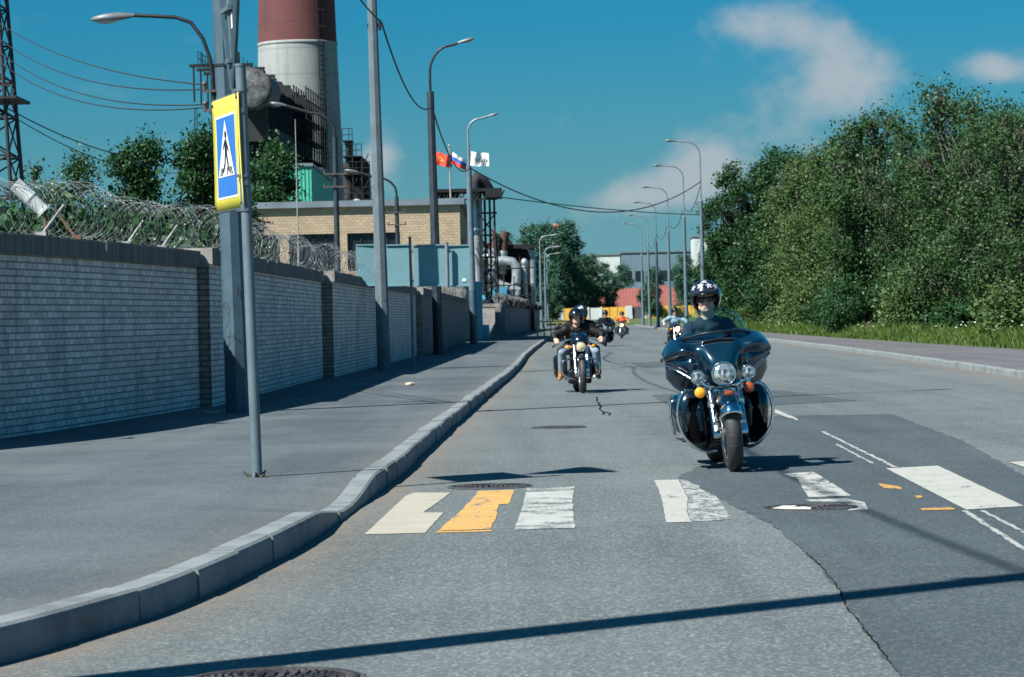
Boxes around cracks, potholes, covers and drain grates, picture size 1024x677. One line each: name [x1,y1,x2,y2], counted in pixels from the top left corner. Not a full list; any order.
manhole cover [759,504,858,512]
crack [795,543,901,675]
manhole cover [192,666,367,677]
